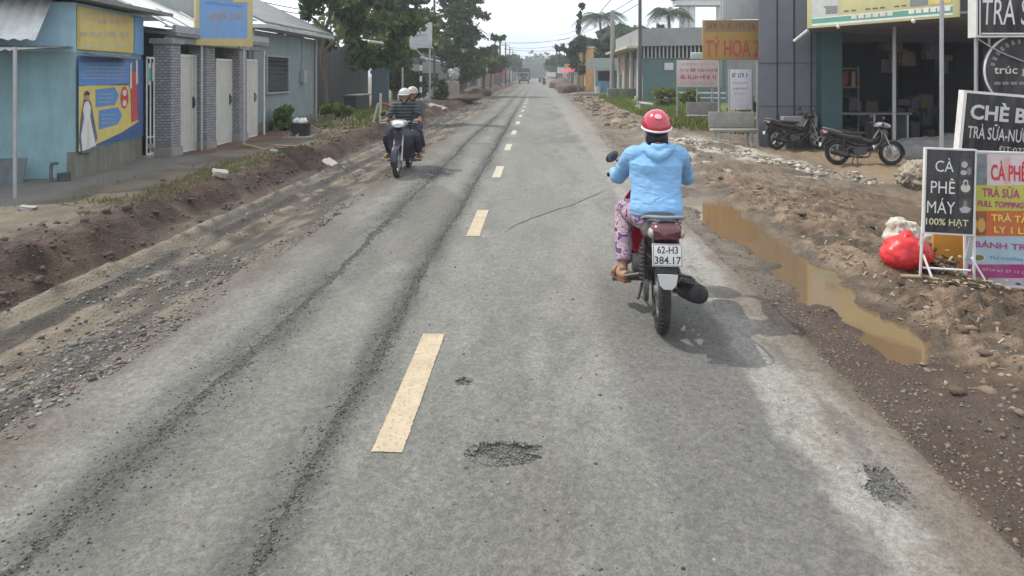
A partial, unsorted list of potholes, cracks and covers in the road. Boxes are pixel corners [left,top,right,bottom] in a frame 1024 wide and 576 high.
pothole [855,463,915,510]
pothole [463,440,543,467]
